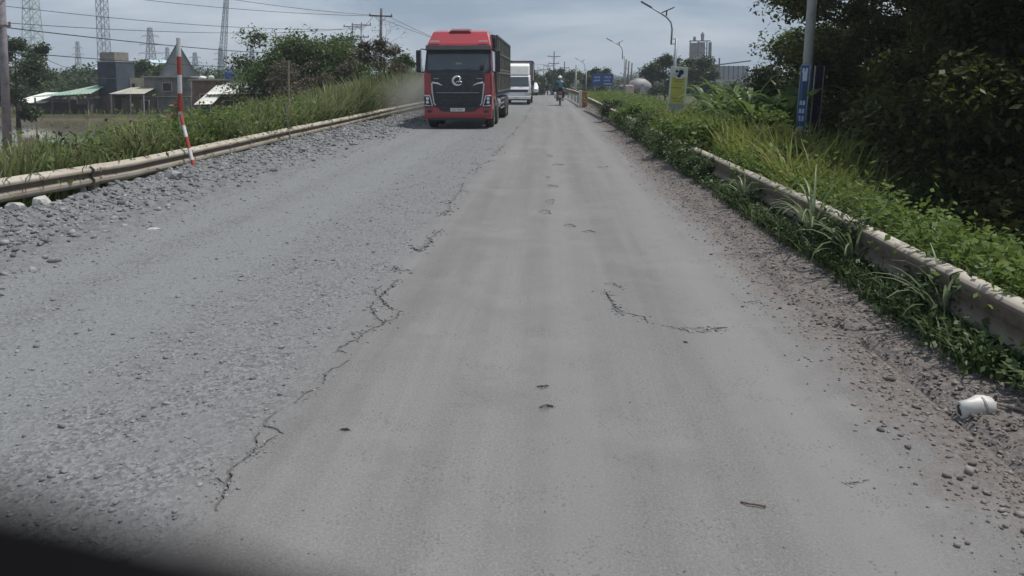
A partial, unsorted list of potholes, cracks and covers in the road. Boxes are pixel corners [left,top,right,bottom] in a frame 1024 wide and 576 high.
crack [591,281,734,334]
crack [831,477,870,488]
pothole [538,404,556,413]
crack [197,107,533,511]
